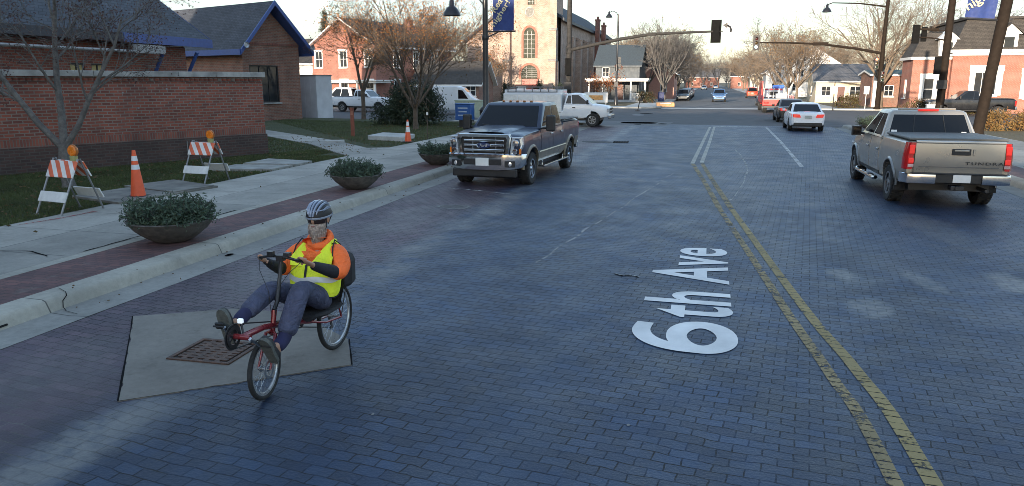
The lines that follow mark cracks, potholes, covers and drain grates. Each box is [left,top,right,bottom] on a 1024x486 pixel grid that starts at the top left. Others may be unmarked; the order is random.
drain grate [166,338,255,365]
